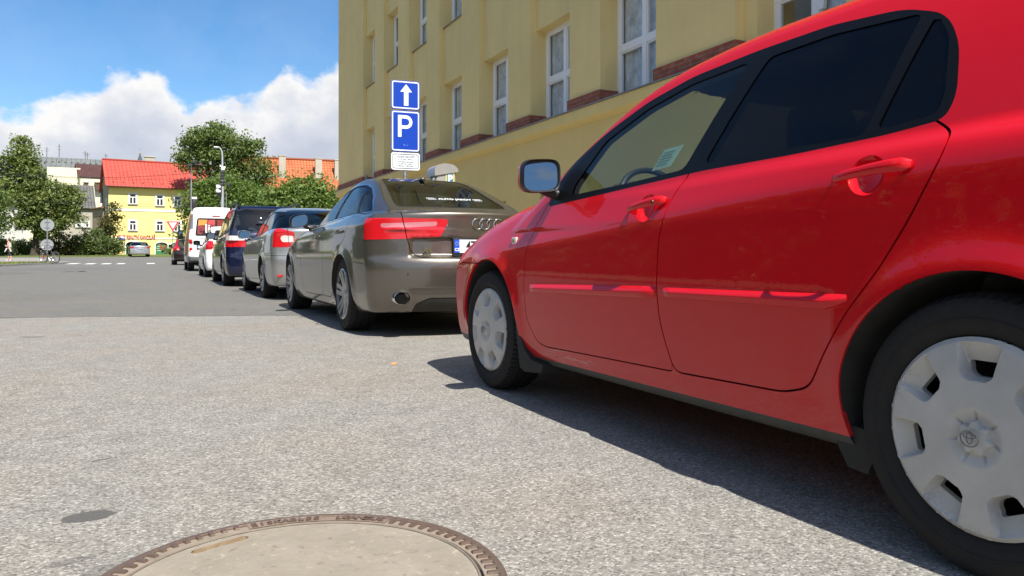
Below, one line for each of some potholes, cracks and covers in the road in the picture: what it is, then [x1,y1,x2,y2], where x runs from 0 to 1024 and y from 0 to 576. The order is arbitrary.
manhole cover [100,514,507,576]
